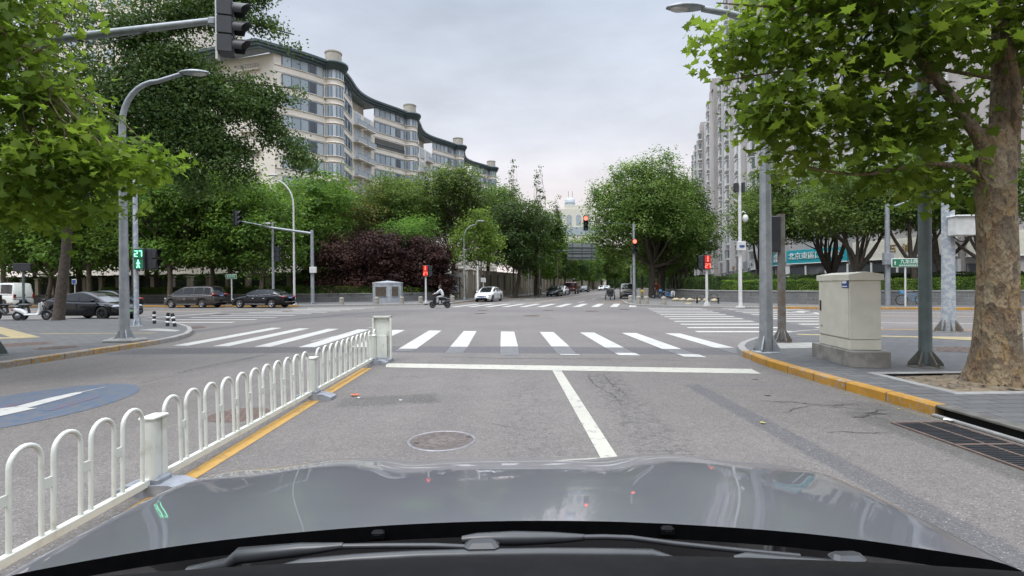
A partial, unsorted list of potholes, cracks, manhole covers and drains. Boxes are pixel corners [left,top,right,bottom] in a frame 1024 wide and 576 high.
drain grate [932,405,1024,444]
drain grate [891,421,1024,471]
crack [761,400,890,433]
manhole cover [407,431,476,452]
manhole cover [207,408,271,423]
